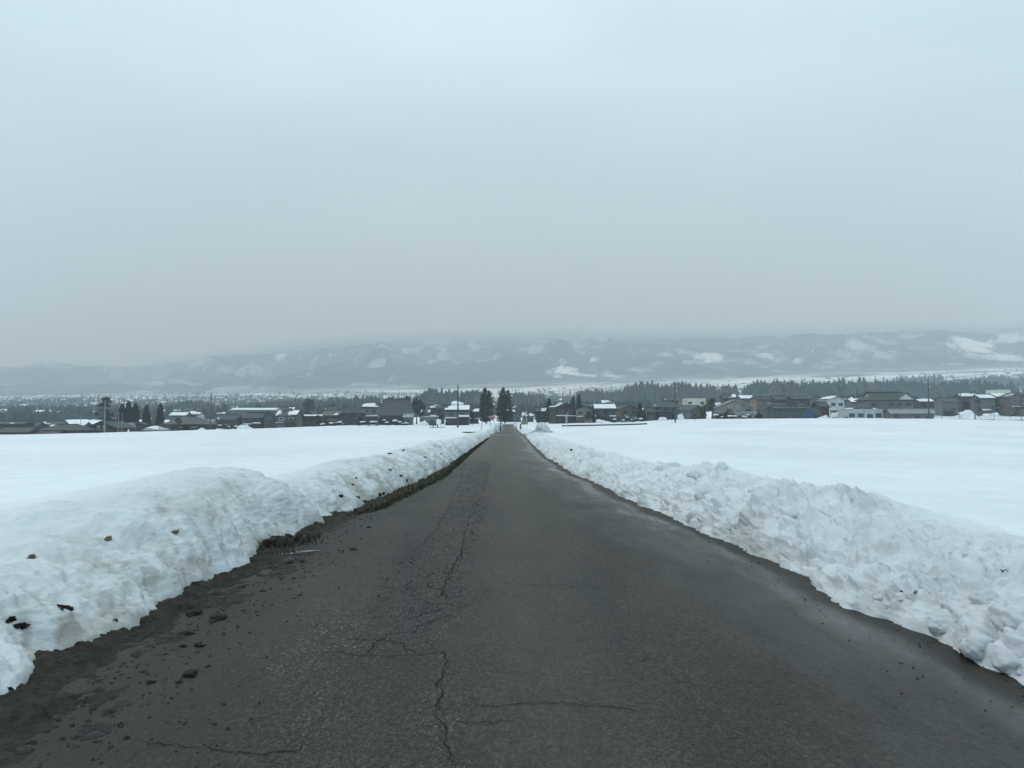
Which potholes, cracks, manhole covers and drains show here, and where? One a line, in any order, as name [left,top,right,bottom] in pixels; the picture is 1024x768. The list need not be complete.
crack [334,461,654,766]
crack [128,734,309,764]
